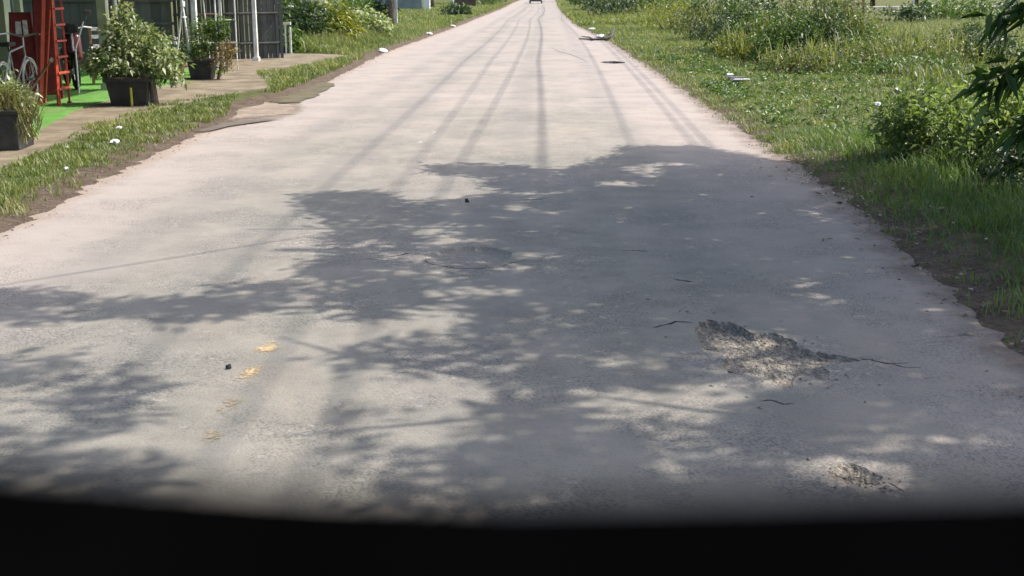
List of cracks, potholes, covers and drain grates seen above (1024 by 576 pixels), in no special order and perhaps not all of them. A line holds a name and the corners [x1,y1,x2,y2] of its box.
pothole [806,457,906,489]
crack [857,359,921,368]
pothole [647,298,890,408]
